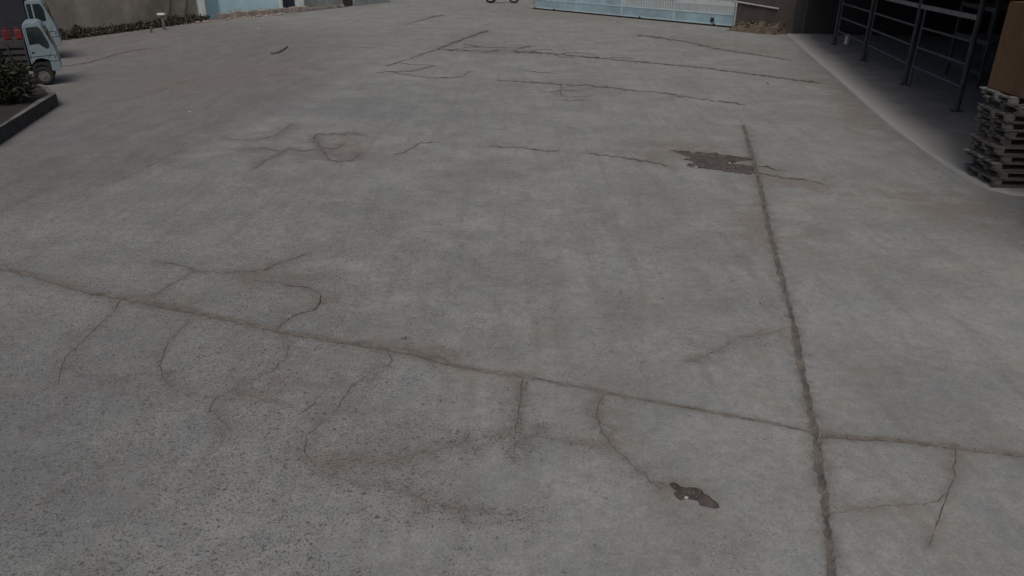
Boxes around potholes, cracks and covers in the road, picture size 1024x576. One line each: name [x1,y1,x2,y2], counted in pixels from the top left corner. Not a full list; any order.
crack [57,254,321,431]
crack [229,129,361,169]
pothole [669,482,719,509]
crack [376,15,819,105]
crack [488,146,667,167]
crack [686,326,791,362]
pothole [670,150,755,175]
crack [829,449,956,542]
crack [302,350,666,517]
